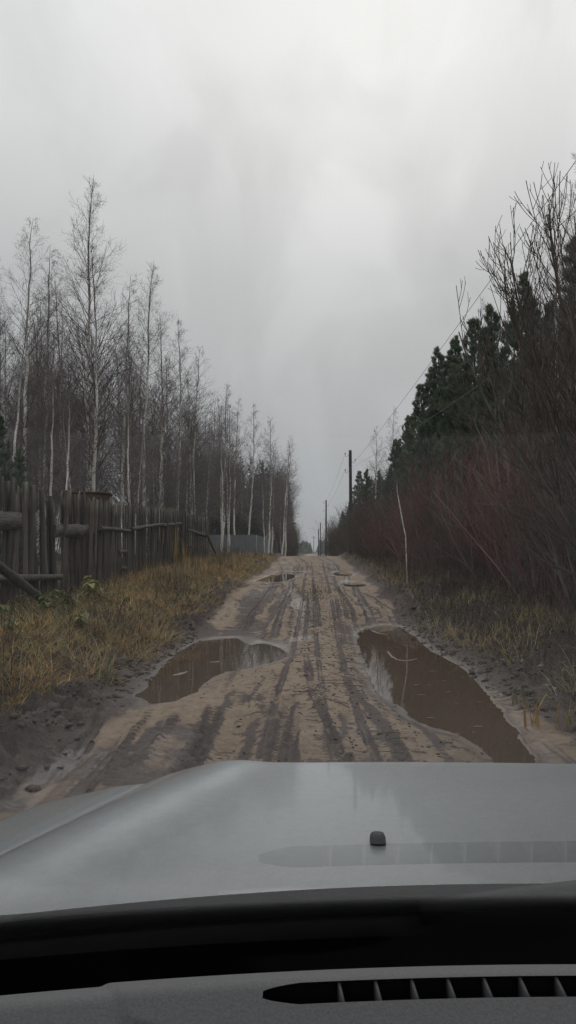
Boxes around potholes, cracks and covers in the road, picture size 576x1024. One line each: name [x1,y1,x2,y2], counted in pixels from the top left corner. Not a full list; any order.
pothole [250,570,311,582]
pothole [123,635,300,705]
pothole [346,621,567,764]
